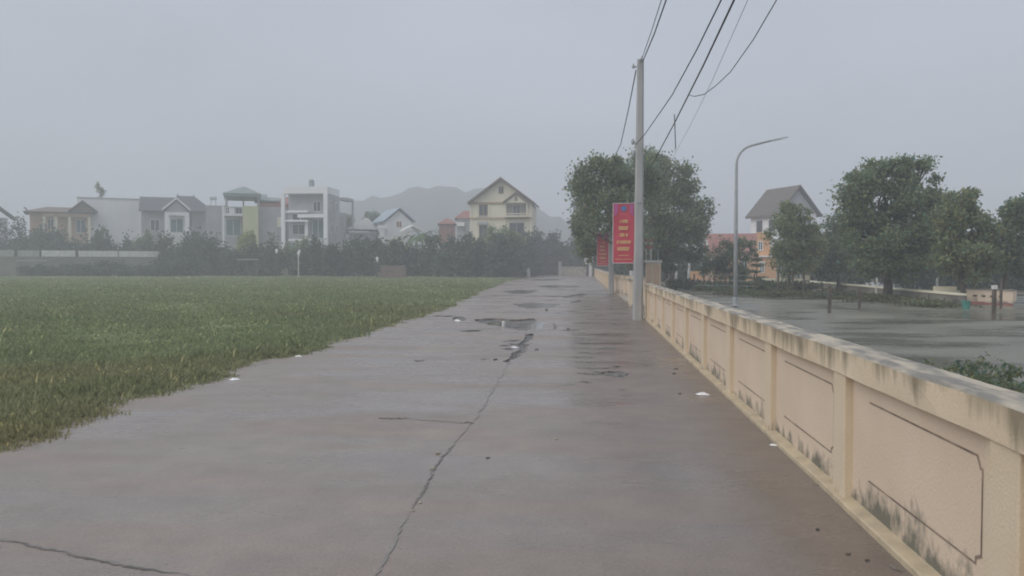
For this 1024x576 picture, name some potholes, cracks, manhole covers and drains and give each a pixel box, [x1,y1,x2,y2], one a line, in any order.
crack [1,539,190,576]
crack [373,358,512,576]
pothole [474,319,537,331]
